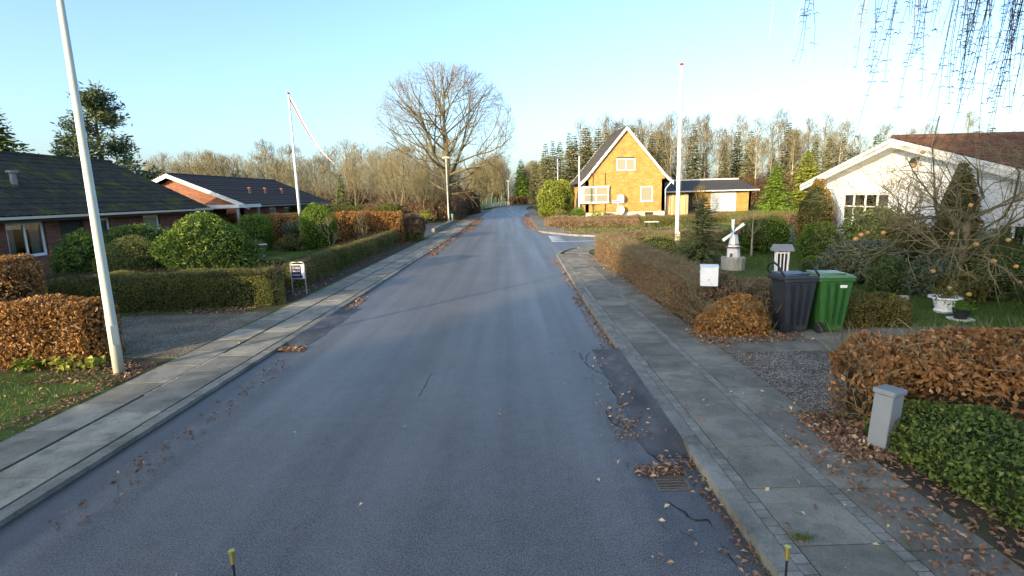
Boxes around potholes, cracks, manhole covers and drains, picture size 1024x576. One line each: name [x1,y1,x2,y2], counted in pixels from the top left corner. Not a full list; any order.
crack [580,352,629,430]
crack [660,502,738,565]
drain grate [650,471,693,491]
